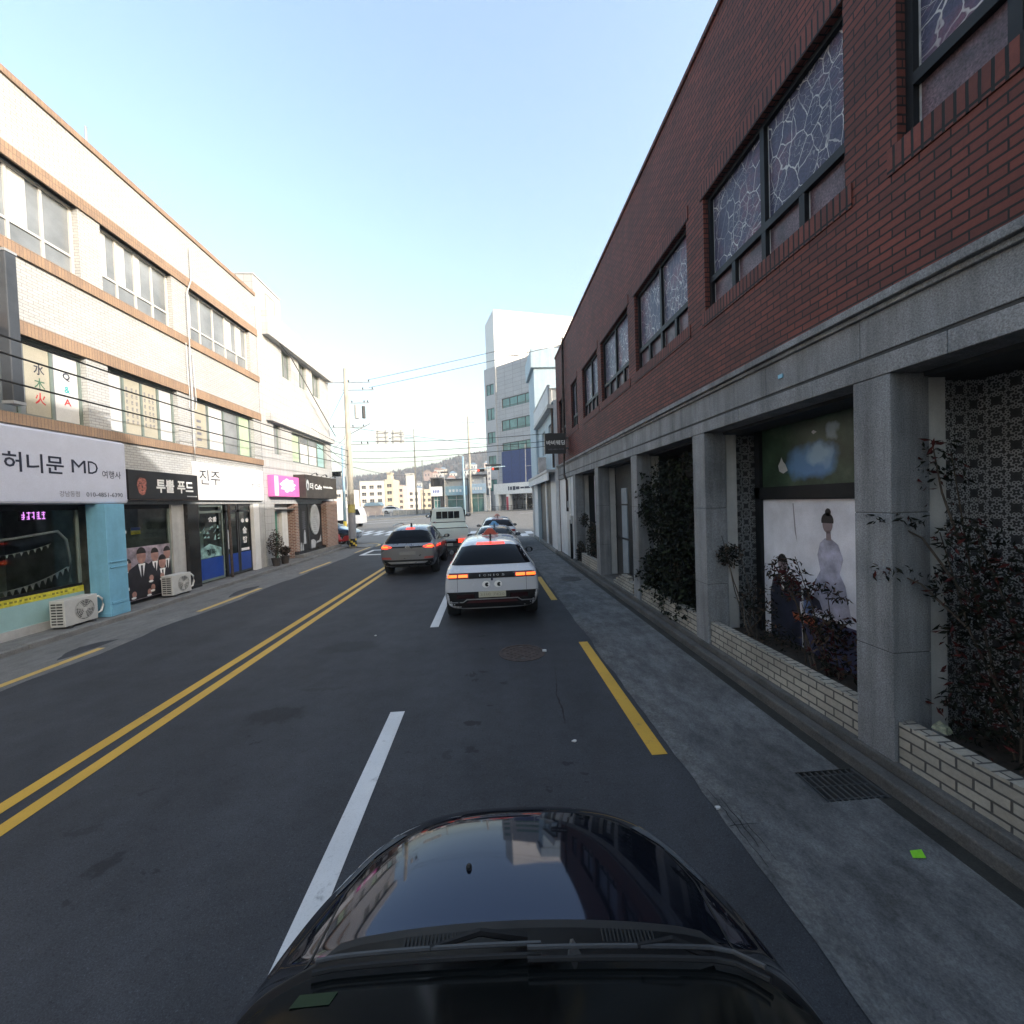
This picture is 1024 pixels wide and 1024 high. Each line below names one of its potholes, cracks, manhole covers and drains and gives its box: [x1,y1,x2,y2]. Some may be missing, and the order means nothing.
drain grate [794,768,892,802]
crack [554,664,565,721]
manhole cover [499,644,545,662]
